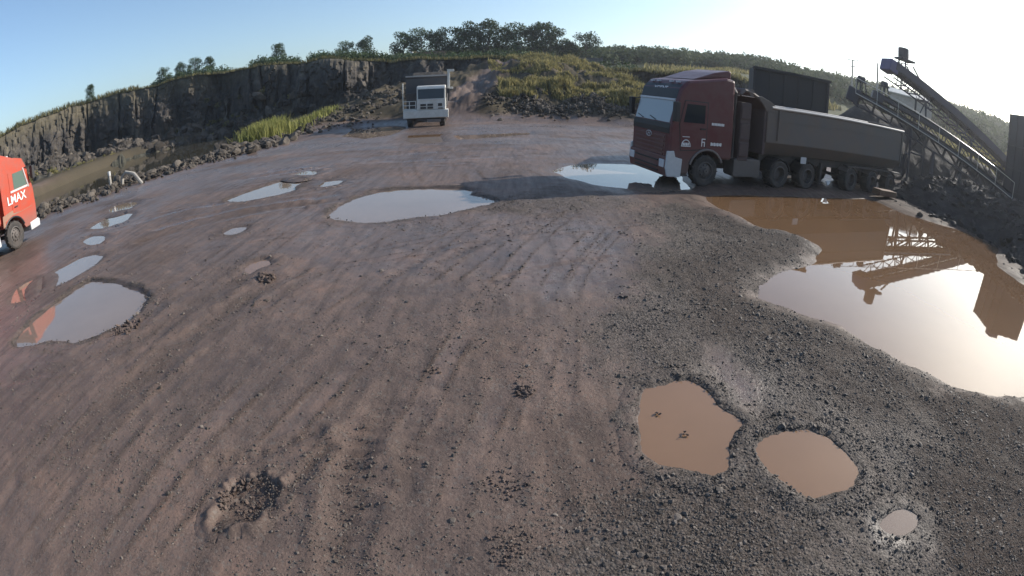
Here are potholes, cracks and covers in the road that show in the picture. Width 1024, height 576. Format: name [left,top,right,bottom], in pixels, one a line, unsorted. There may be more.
pothole [95,197,152,219]
pothole [70,229,119,251]
pothole [732,414,878,516]
pothole [311,184,512,228]
pothole [226,252,288,282]
pothole [1,273,164,355]
pothole [295,176,359,190]
pothole [860,492,936,554]
pothole [614,368,762,492]
pothole [76,207,147,234]
pothole [194,462,299,545]
pothole [211,175,325,206]
